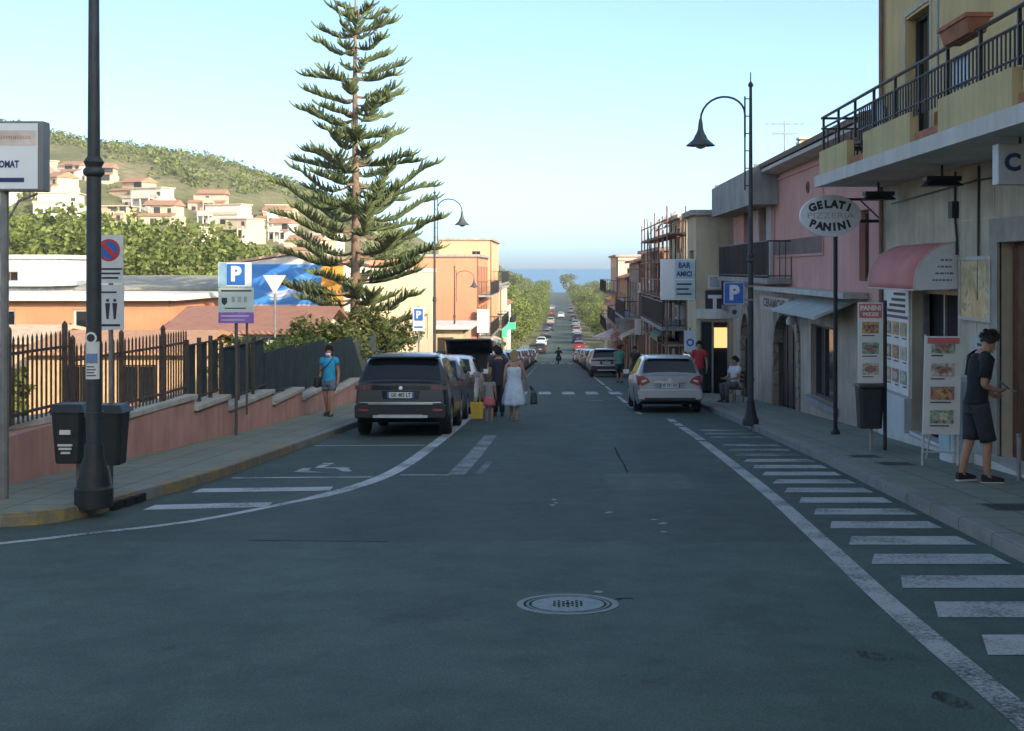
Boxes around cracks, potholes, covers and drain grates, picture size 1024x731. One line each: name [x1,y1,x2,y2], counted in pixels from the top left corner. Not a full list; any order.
manhole cover [517,594,619,615]
